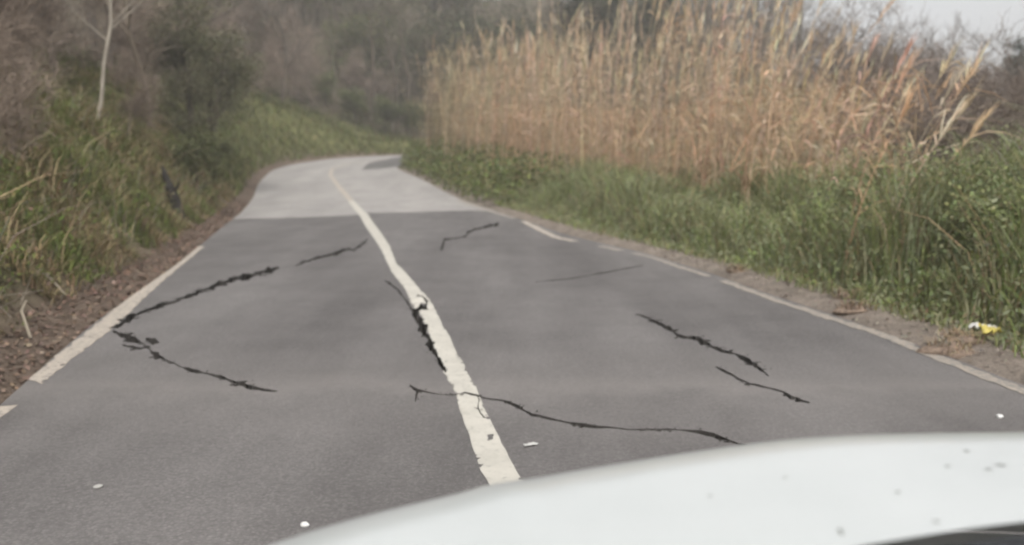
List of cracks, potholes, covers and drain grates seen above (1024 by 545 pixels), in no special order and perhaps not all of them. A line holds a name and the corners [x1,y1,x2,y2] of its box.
crack [539,265,643,282]
crack [440,222,499,251]
crack [385,280,810,445]
crack [110,238,368,392]
